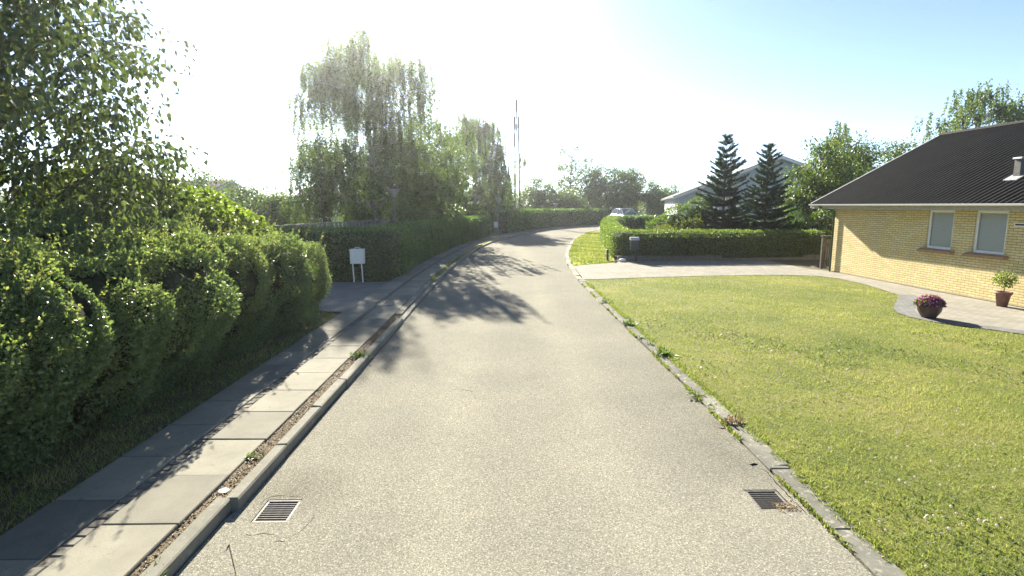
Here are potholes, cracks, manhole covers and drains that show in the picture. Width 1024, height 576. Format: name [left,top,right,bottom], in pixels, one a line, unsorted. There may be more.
drain grate [744,490,794,510]
drain grate [251,499,302,522]
